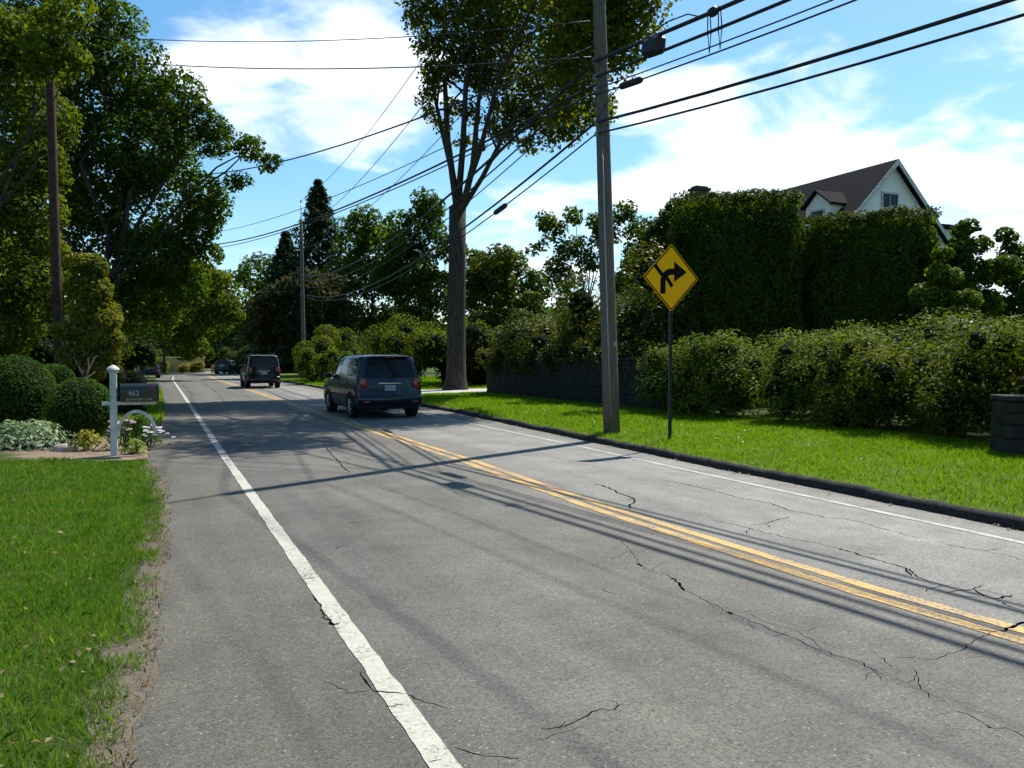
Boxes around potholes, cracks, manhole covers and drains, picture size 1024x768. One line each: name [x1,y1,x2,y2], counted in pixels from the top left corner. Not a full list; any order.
crack [327,672,447,709]
crack [596,484,636,508]
crack [542,701,621,739]
crack [604,479,1024,737]
crack [300,580,338,626]
crack [199,448,377,474]
crack [455,747,516,759]
